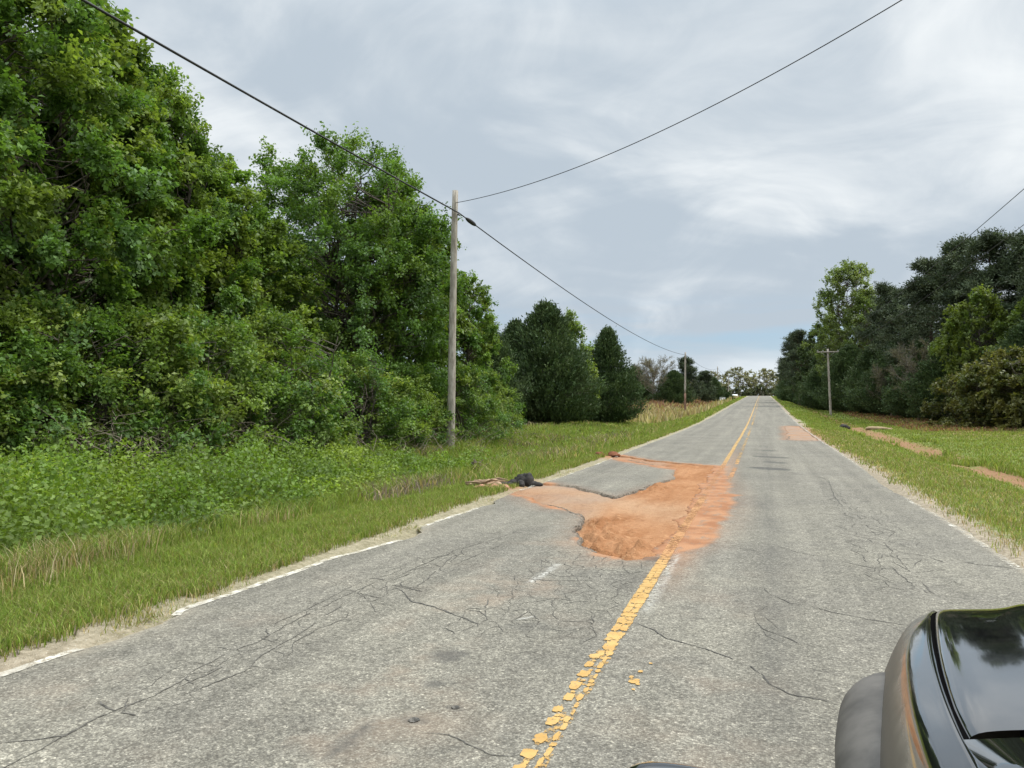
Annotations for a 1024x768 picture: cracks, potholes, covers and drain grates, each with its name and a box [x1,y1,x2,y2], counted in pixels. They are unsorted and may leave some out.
pothole [514,457,715,561]
pothole [785,426,817,441]
crack [786,471,963,593]
crack [610,620,833,702]
crack [1,528,647,768]
